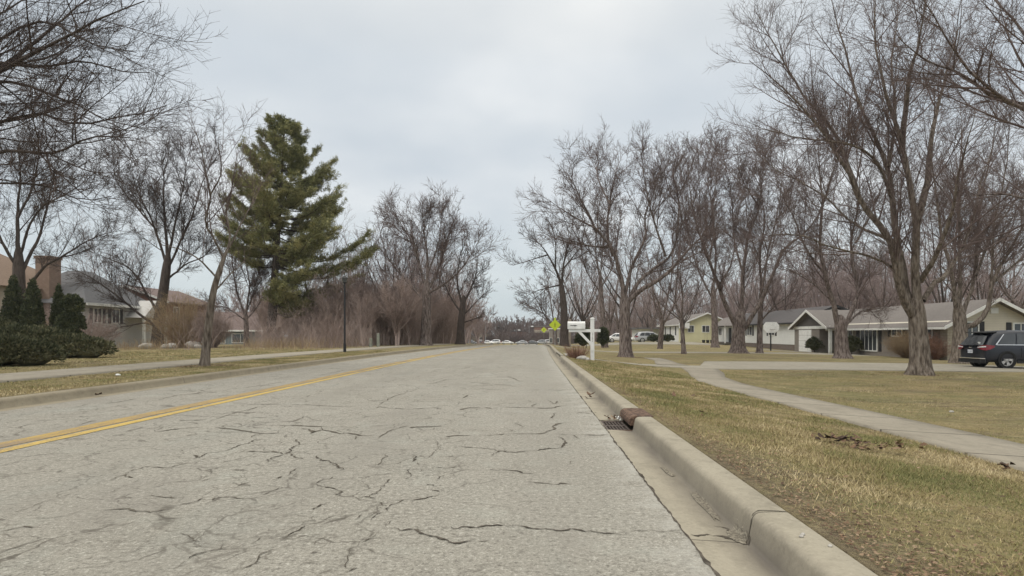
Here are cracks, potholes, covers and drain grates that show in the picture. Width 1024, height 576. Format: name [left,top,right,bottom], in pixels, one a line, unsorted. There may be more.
drain grate [600,408,654,431]
crack [96,376,674,572]
crack [4,480,77,550]
